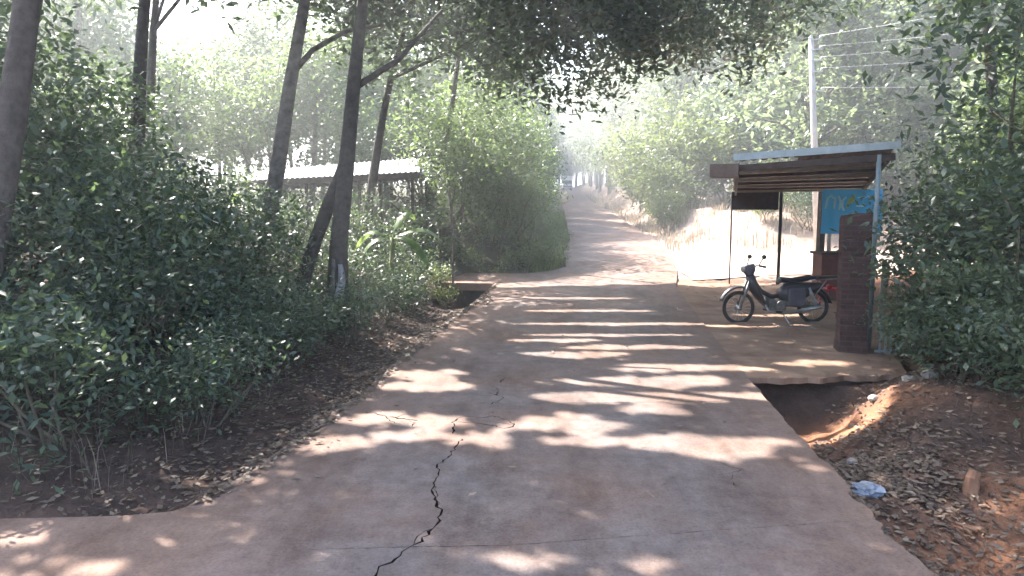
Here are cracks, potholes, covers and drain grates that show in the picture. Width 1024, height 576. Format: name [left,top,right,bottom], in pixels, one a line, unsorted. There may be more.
crack [364,379,805,576]
